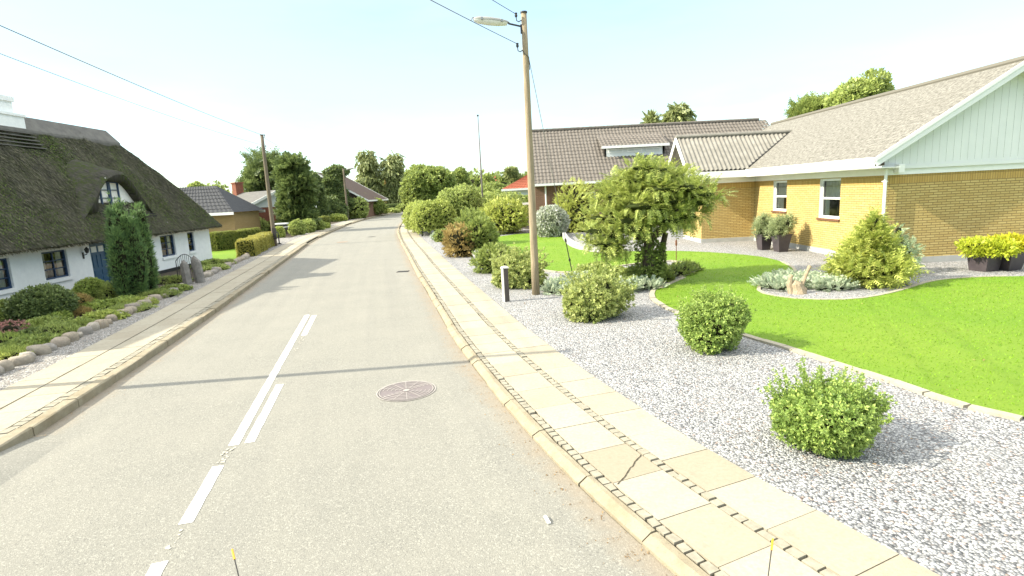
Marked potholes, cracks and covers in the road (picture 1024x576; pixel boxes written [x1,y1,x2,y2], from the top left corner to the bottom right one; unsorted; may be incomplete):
manhole cover [376,381,436,401]
